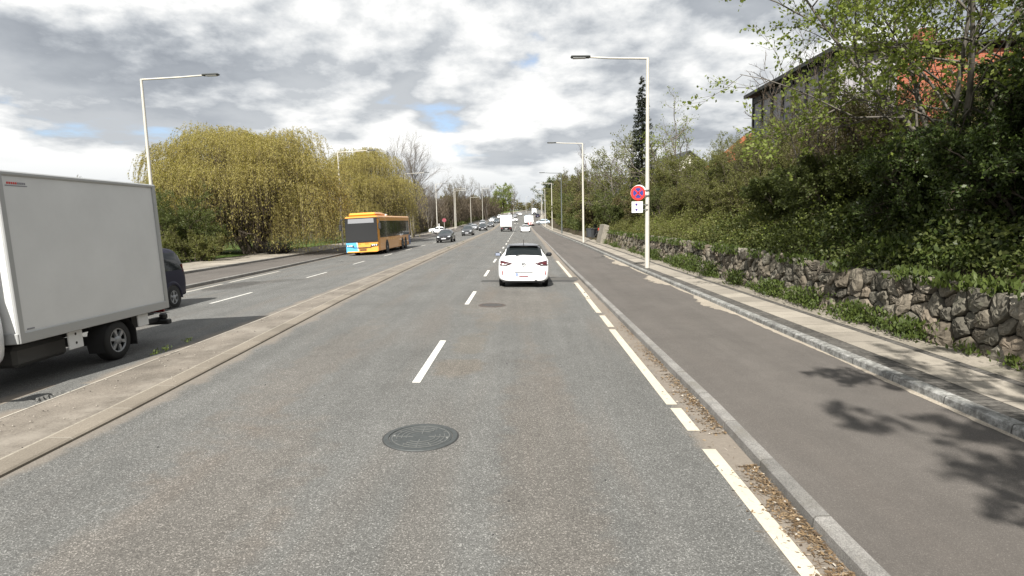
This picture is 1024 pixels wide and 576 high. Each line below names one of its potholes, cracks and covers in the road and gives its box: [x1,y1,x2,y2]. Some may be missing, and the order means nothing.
manhole cover [382,424,459,452]
